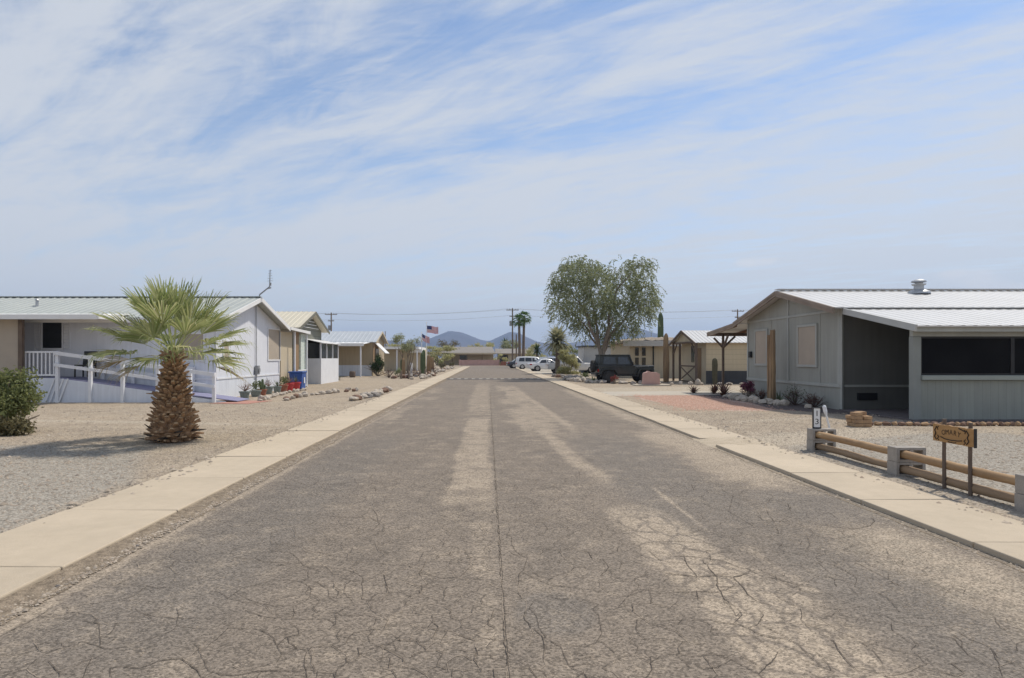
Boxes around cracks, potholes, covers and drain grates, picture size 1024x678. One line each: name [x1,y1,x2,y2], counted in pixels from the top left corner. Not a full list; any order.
crack [634,462,1024,676]
crack [0,427,889,678]
